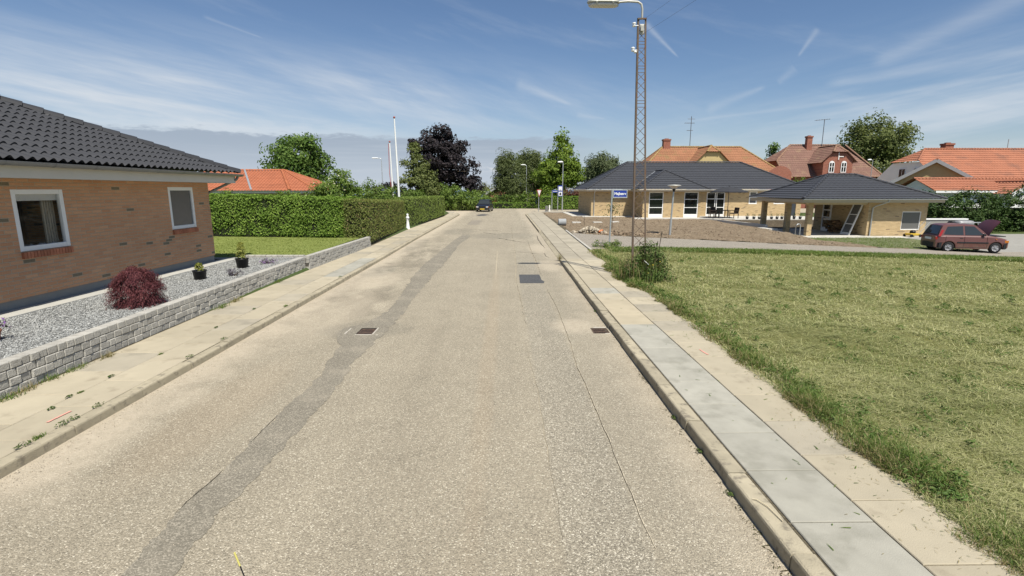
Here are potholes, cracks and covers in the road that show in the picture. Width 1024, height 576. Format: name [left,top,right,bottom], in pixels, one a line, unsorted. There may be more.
crack [179,470,223,510]
